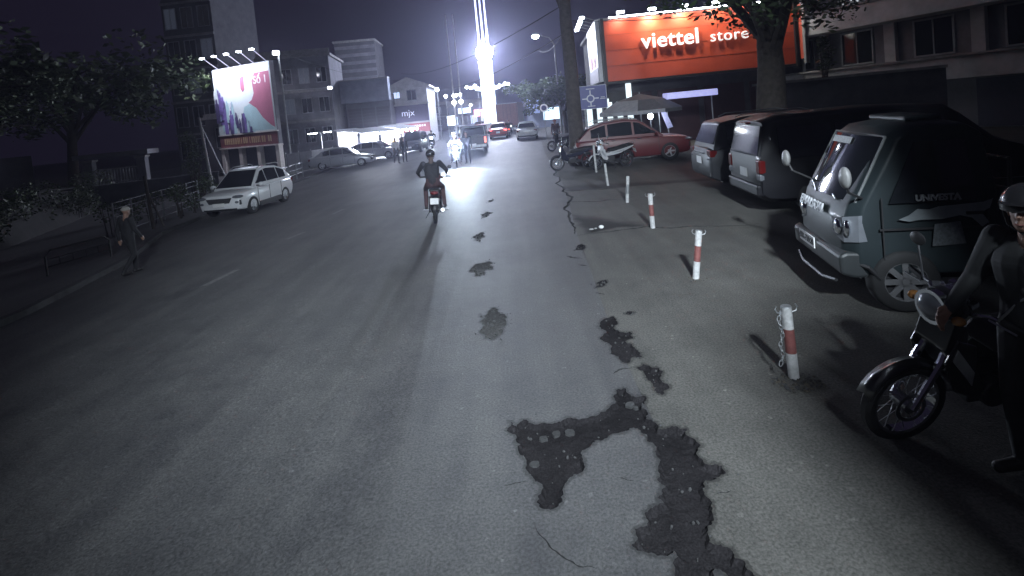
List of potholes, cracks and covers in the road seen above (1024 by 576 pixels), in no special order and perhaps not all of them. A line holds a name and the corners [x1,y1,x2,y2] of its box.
pothole [475,306,512,340]
pothole [600,316,642,363]
pothole [469,259,493,276]
crack [549,167,759,235]
crack [535,526,597,569]
pothole [507,386,755,576]
pothole [637,363,670,395]
